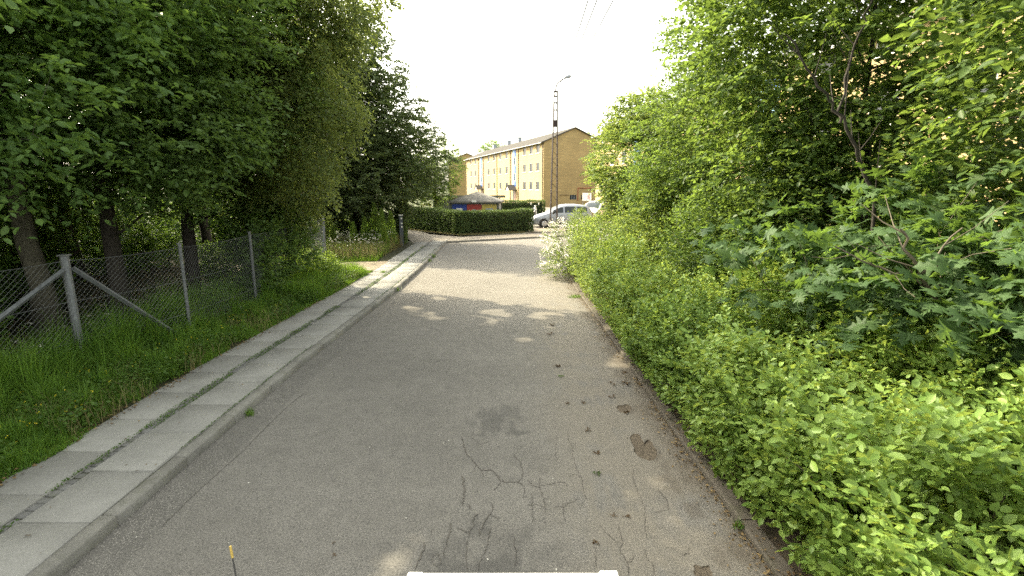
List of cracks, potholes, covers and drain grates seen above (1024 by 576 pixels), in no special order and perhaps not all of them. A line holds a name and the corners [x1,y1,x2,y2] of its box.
pothole [628,433,660,463]
crack [415,438,574,570]
crack [595,525,655,574]
